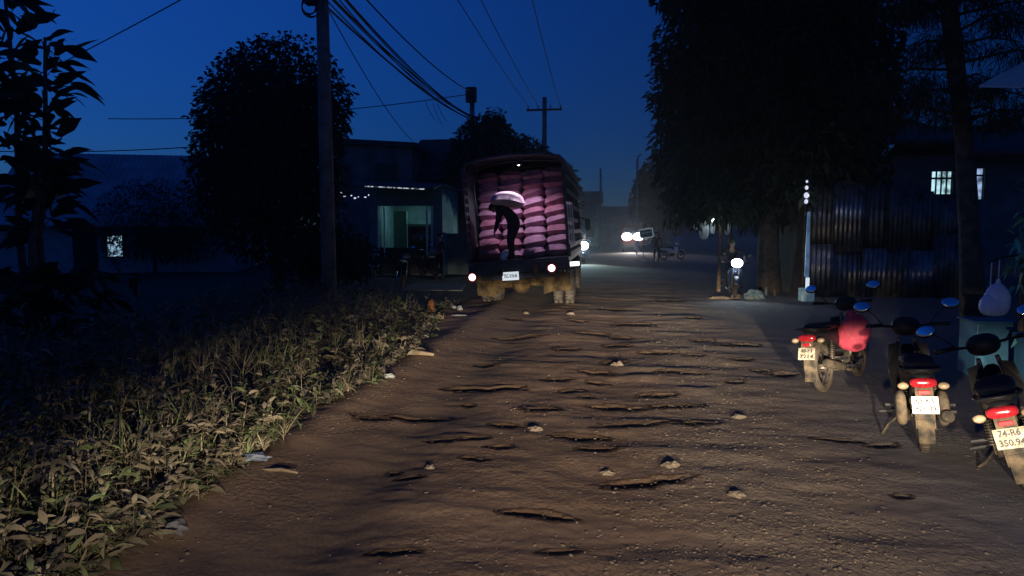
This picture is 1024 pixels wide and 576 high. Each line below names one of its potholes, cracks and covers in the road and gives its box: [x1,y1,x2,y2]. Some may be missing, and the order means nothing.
pothole [518,406,566,414]
pothole [420,436,469,445]
pothole [632,391,682,399]
pothole [493,507,586,525]
pothole [491,333,550,342]
pothole [550,431,616,443]
pothole [377,414,458,424]
pothole [588,420,692,429]
pothole [391,474,429,482]
pothole [346,412,396,422]
pothole [887,493,916,501]
pothole [437,384,532,394]
